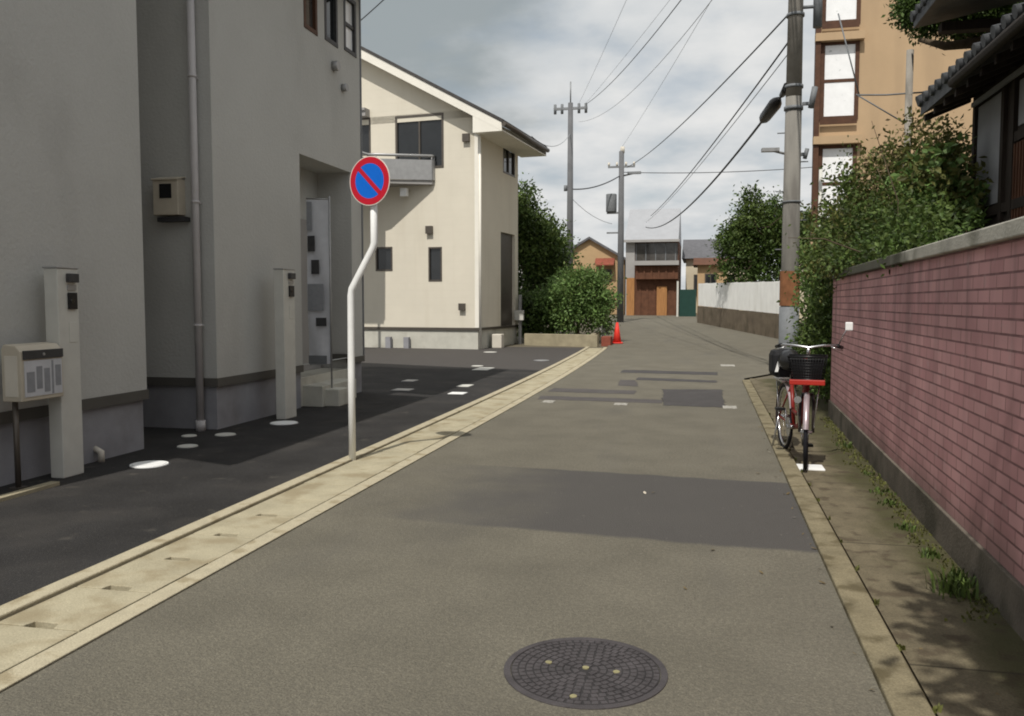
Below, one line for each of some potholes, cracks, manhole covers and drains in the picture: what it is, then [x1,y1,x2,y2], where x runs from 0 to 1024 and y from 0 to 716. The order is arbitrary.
manhole cover [504,637,668,710]
